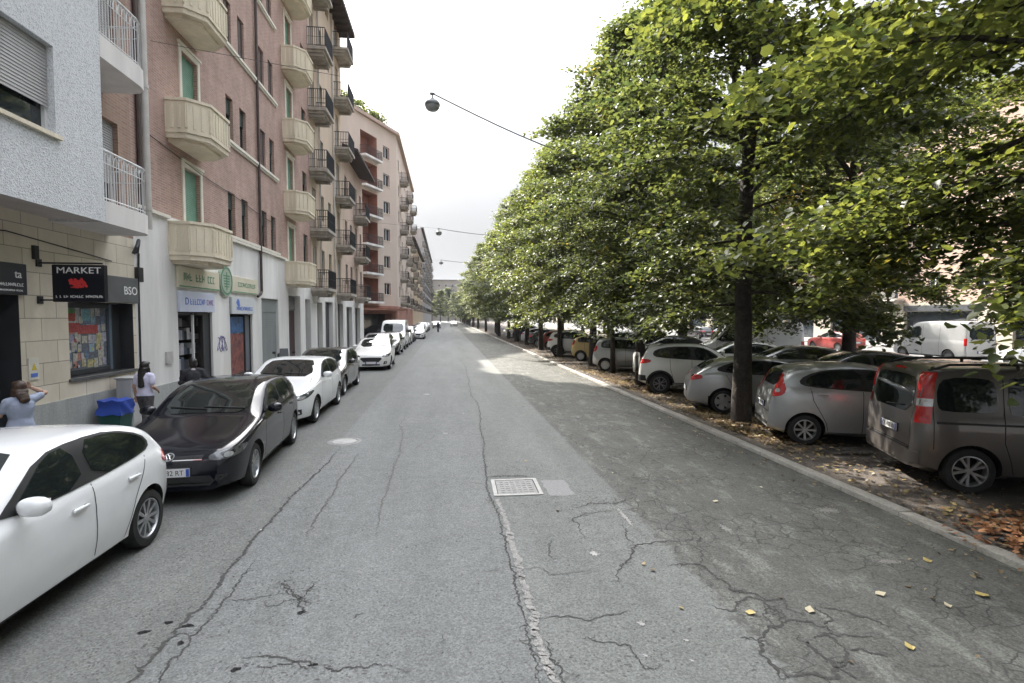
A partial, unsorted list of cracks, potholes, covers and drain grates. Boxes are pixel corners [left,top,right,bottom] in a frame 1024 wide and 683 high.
crack [158,560,320,683]
crack [248,654,410,676]
crack [546,641,572,683]
crack [546,611,663,670]
crack [569,497,896,683]
crack [306,457,356,538]
crack [524,541,593,575]
crack [376,412,458,536]
